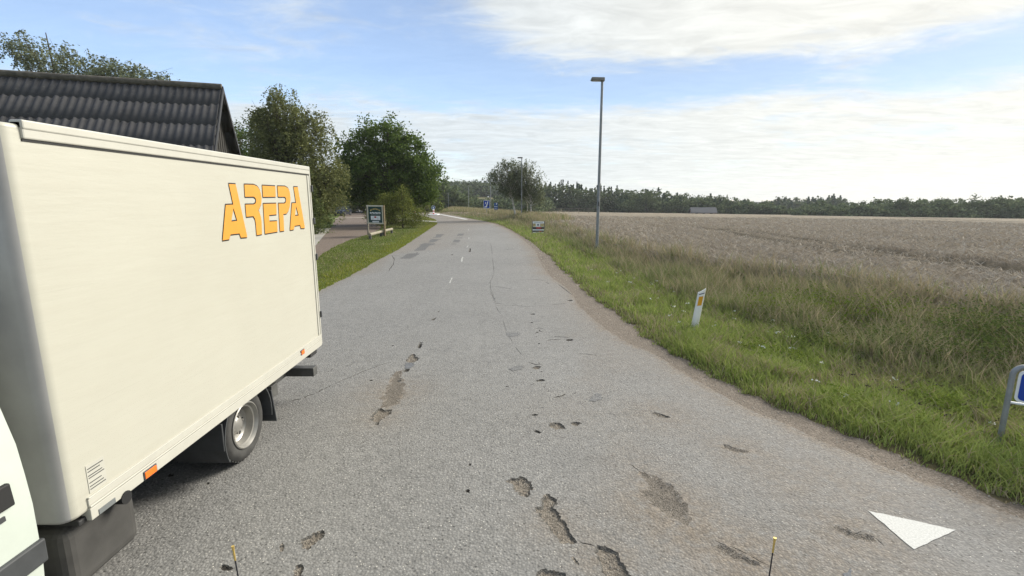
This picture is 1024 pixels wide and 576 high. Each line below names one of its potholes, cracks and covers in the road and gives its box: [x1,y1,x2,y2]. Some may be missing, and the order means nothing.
pothole [300,530,325,550]
pothole [369,408,393,425]
pothole [535,493,577,544]
pothole [833,525,878,544]
pothole [506,476,534,497]
pothole [637,471,692,526]
pothole [715,544,762,568]
pothole [594,545,632,576]
pothole [721,444,751,454]
pothole [536,568,566,576]
